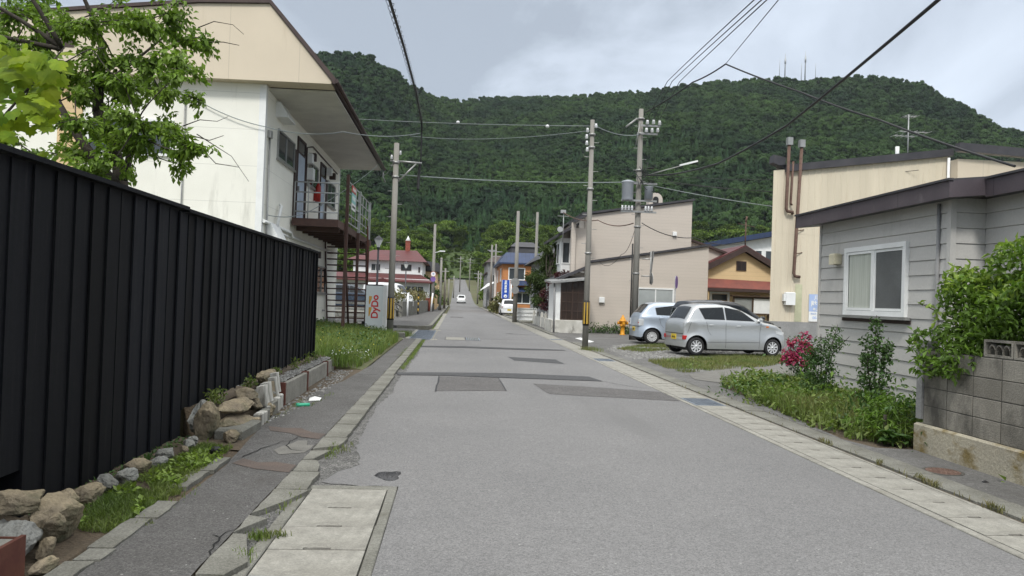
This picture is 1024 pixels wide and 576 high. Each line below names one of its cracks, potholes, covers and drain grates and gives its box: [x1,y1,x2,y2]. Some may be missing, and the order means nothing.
drain grate [681,398,725,406]
pothole [374,471,401,481]
manhole cover [922,467,965,476]
